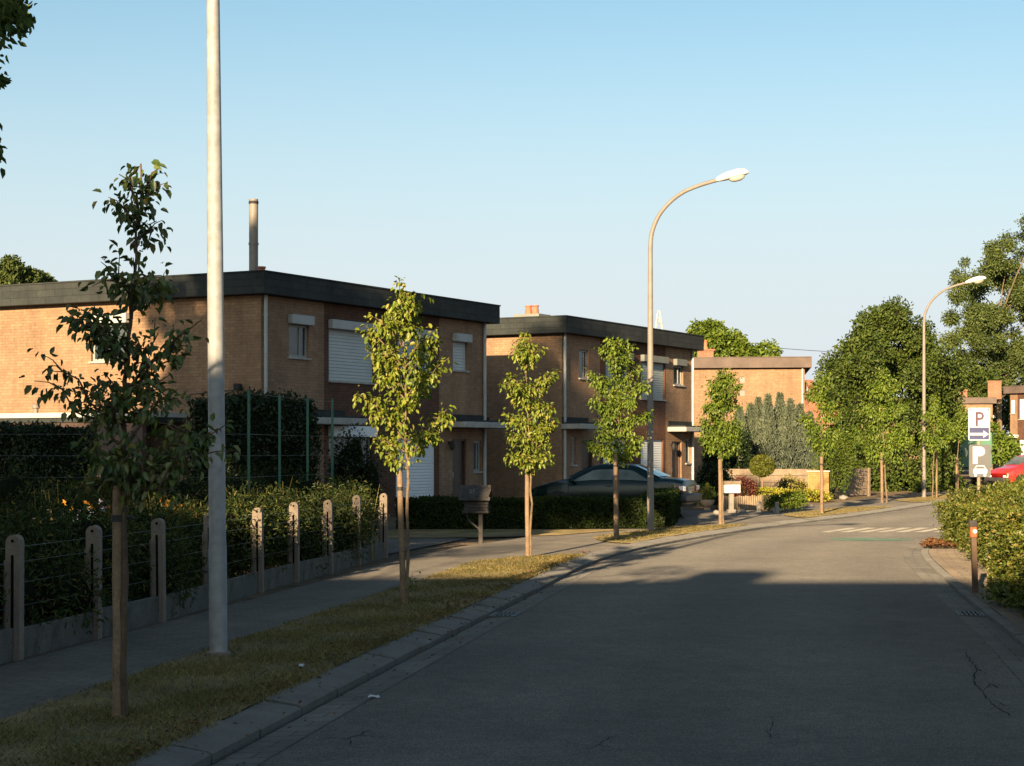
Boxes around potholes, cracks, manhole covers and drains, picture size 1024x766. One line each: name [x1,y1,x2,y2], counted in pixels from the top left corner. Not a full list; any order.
crack [966,652,1010,715]
